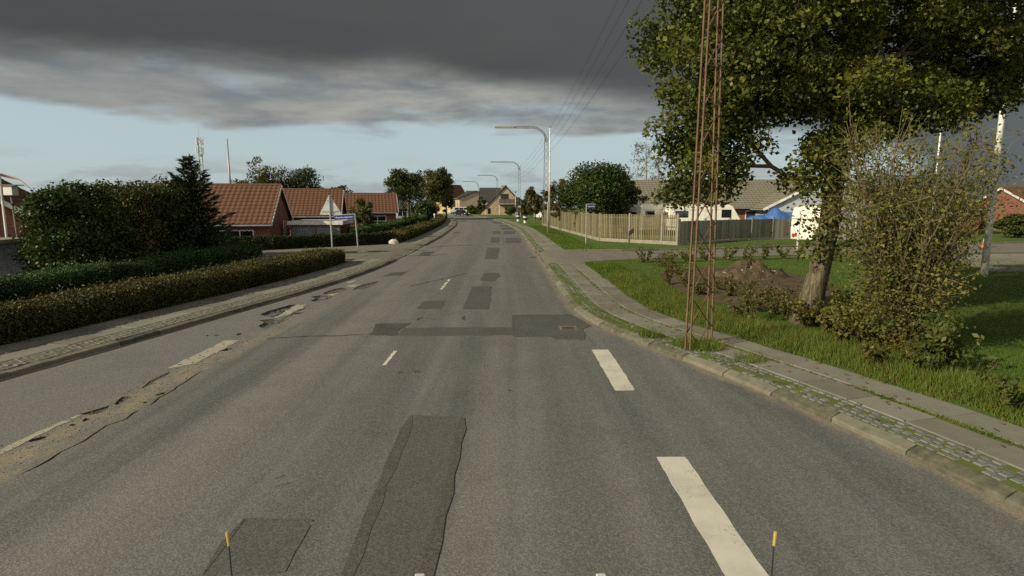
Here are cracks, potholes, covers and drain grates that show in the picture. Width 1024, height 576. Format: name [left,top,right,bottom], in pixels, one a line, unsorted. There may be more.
pothole [260,304,295,317]
pothole [259,319,285,329]
